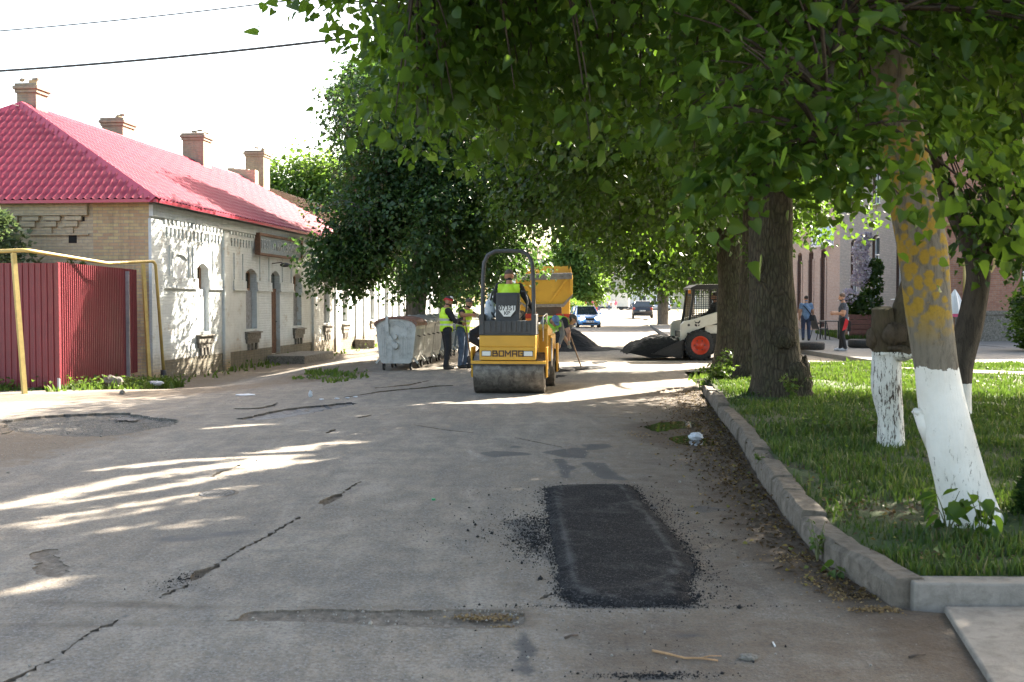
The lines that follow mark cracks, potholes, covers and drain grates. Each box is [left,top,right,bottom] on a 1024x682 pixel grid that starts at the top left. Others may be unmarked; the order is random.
pothole [0,413,178,437]
crack [3,481,361,682]
pothole [29,549,70,577]
